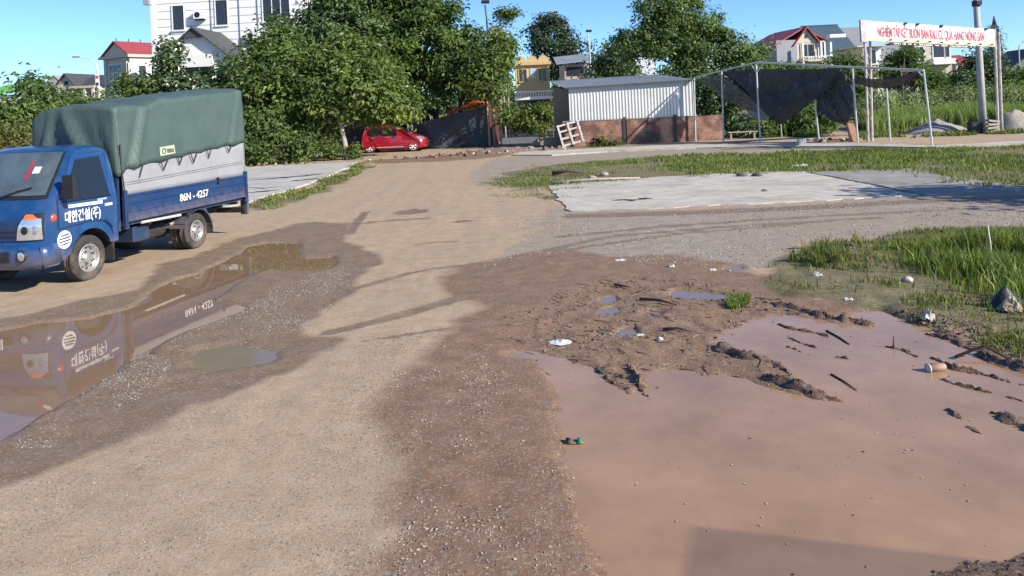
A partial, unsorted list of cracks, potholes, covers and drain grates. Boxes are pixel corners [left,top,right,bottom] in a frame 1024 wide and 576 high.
pothole [498,304,1024,576]
pothole [0,240,340,442]
pothole [595,295,620,303]
pothole [660,286,733,301]
